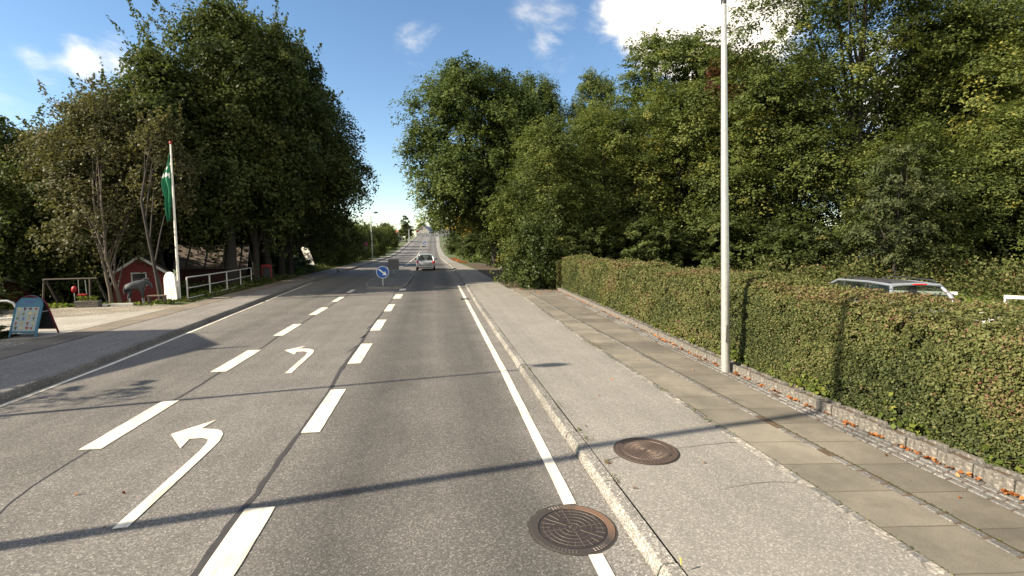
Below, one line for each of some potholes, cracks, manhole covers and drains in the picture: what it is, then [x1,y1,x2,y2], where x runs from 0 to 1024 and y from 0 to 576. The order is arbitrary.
manhole cover [613,437,680,465]
manhole cover [527,504,617,556]
